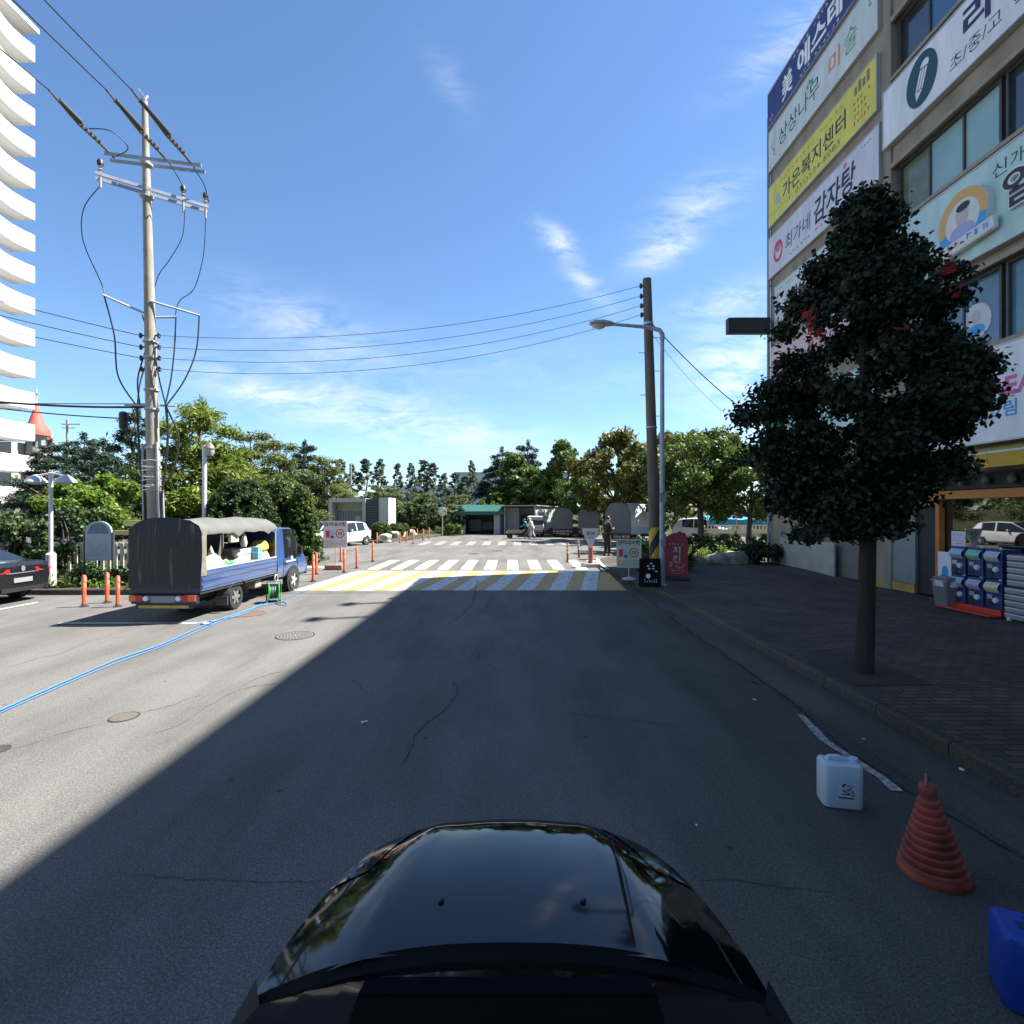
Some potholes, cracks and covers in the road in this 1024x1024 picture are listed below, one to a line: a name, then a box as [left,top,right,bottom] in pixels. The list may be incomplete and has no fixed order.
manhole cover [275,631,315,640]
crack [376,581,491,662]
crack [124,869,329,883]
manhole cover [107,712,140,722]
crack [16,670,292,748]
crack [401,644,500,766]
